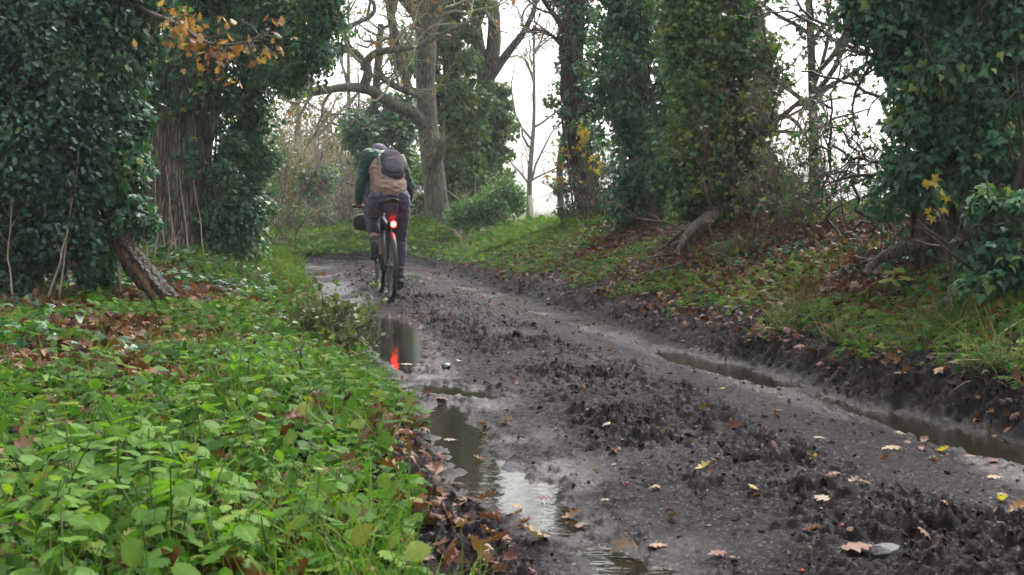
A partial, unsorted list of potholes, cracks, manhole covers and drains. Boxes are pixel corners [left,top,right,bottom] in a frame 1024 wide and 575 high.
pothole [391,378,529,402]
pothole [334,310,451,376]
